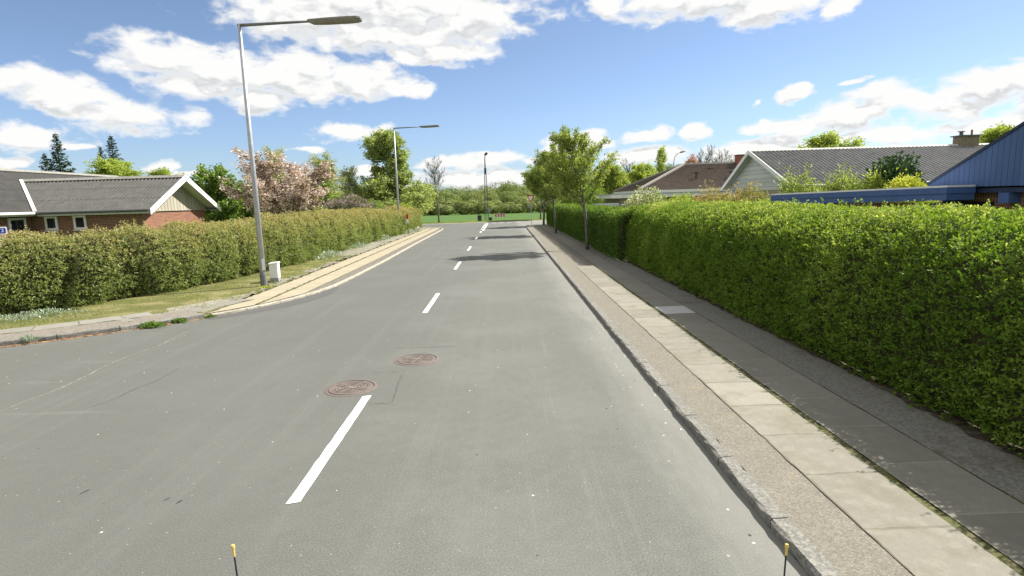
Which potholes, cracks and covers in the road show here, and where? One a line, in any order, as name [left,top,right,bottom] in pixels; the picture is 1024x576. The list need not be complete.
crack [1,331,188,411]
manhole cover [324,380,378,397]
manhole cover [394,354,439,366]
